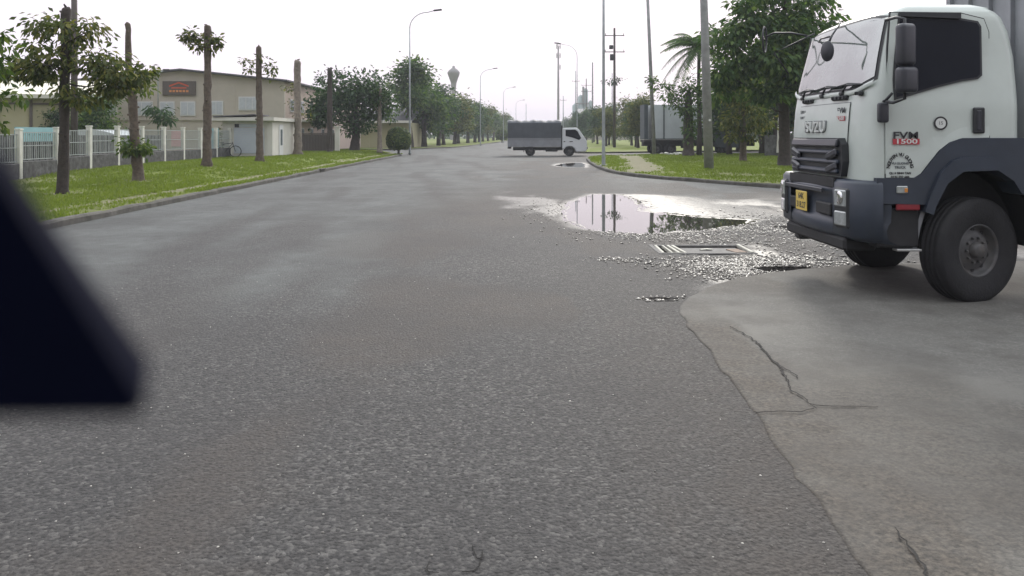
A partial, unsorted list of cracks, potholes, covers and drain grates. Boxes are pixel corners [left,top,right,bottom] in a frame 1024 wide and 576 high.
crack [734,328,878,413]
pothole [561,194,761,236]
crack [895,528,928,576]
crack [426,545,483,574]
